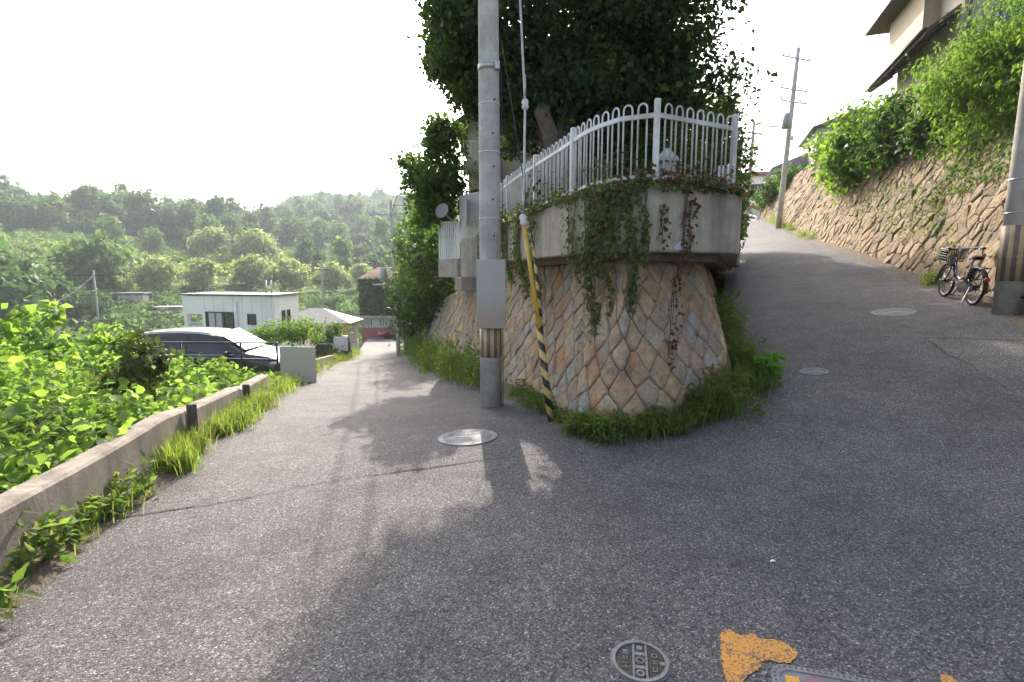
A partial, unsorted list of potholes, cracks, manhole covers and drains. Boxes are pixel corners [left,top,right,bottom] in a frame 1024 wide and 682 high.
utility cover [610,640,671,682]
manhole cover [800,368,829,376]
manhole cover [871,308,917,316]
manhole cover [438,429,497,446]
